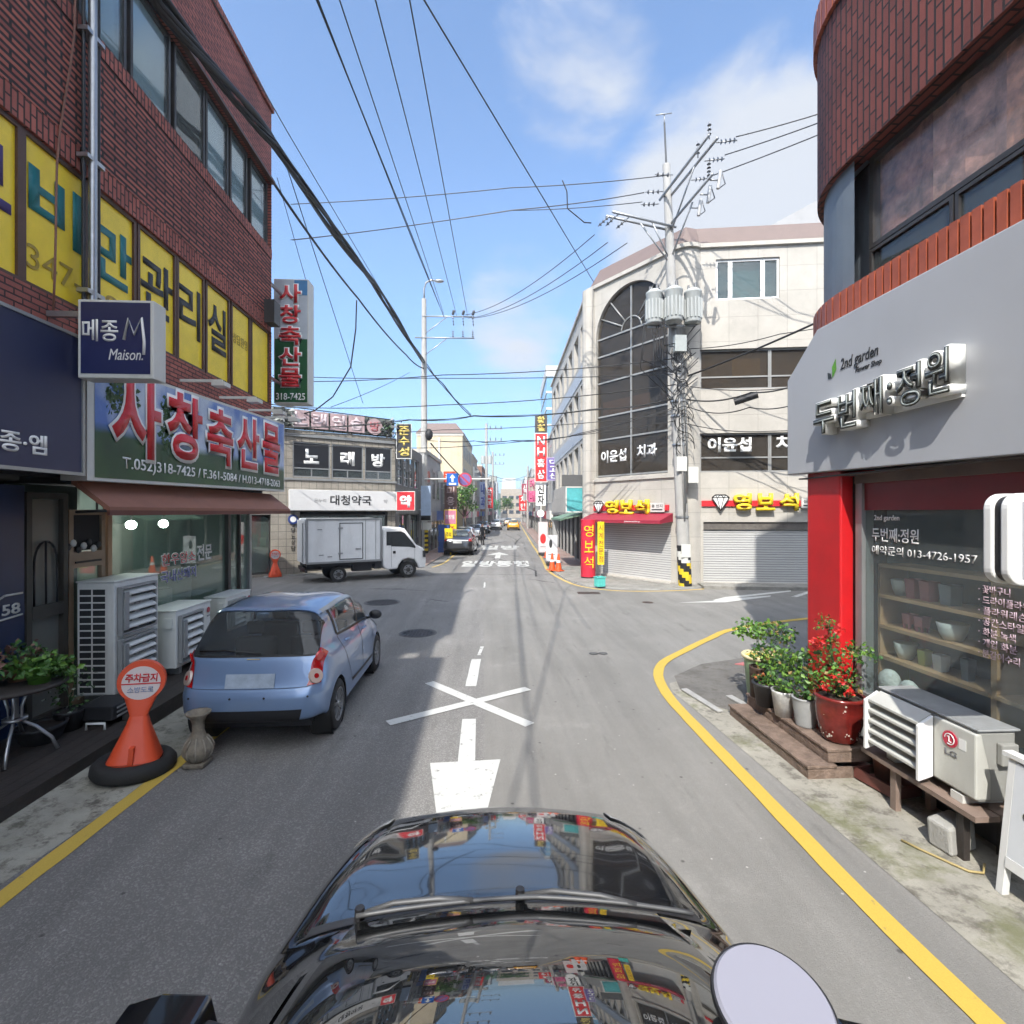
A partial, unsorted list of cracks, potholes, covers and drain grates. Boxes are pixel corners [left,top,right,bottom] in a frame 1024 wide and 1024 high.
manhole cover [399,629,437,638]
